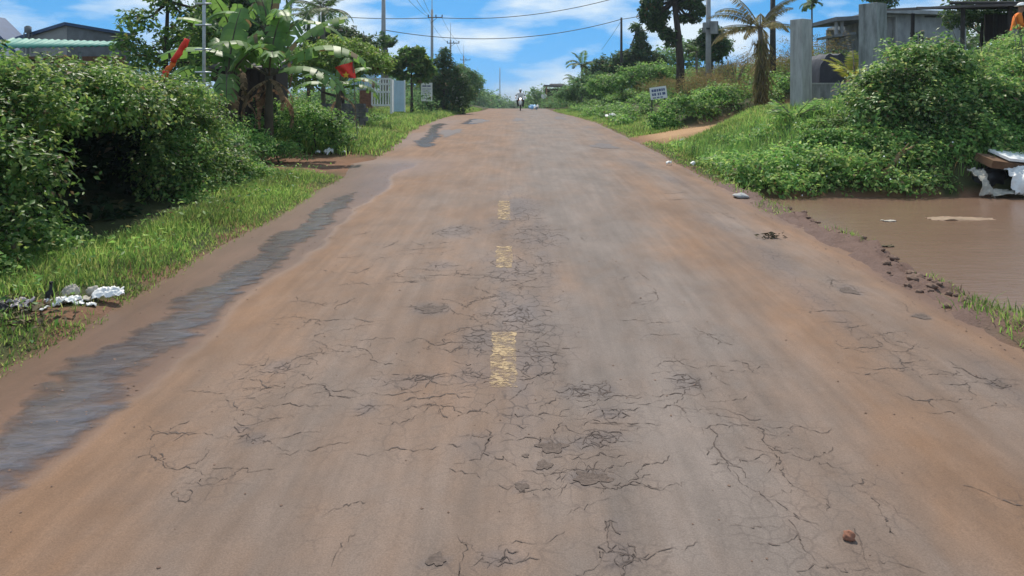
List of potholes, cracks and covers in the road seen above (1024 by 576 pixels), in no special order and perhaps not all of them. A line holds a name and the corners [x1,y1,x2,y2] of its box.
pothole [573,471,614,485]
pothole [415,305,448,313]
pothole [425,551,447,566]
crack [797,277,1015,414]
crack [138,207,923,576]
pothole [534,441,569,453]
pothole [536,459,553,469]
